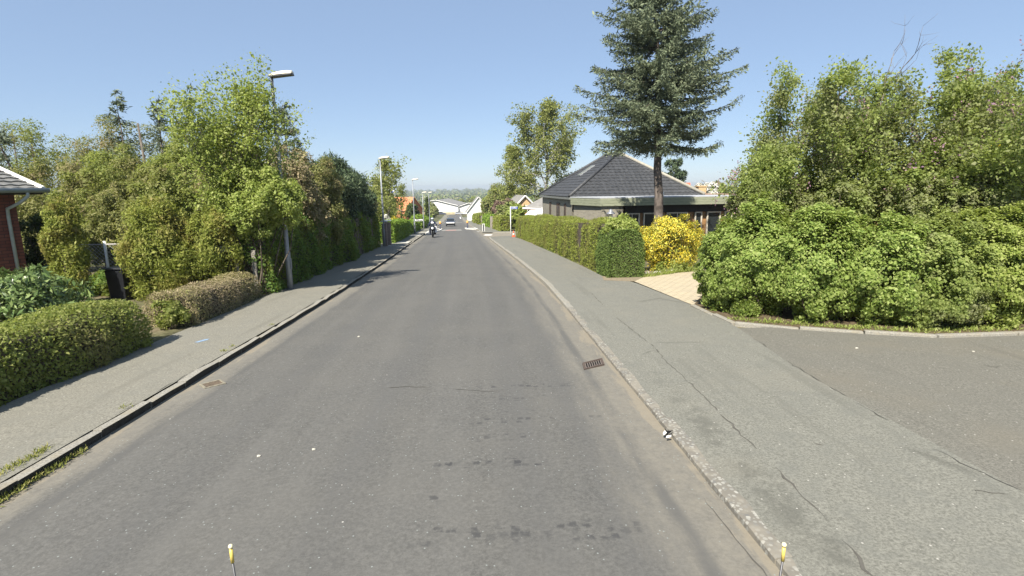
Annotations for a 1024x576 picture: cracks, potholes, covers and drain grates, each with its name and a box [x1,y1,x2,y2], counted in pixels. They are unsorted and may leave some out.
drain grate [582,358,604,370]
crack [592,294,873,576]
